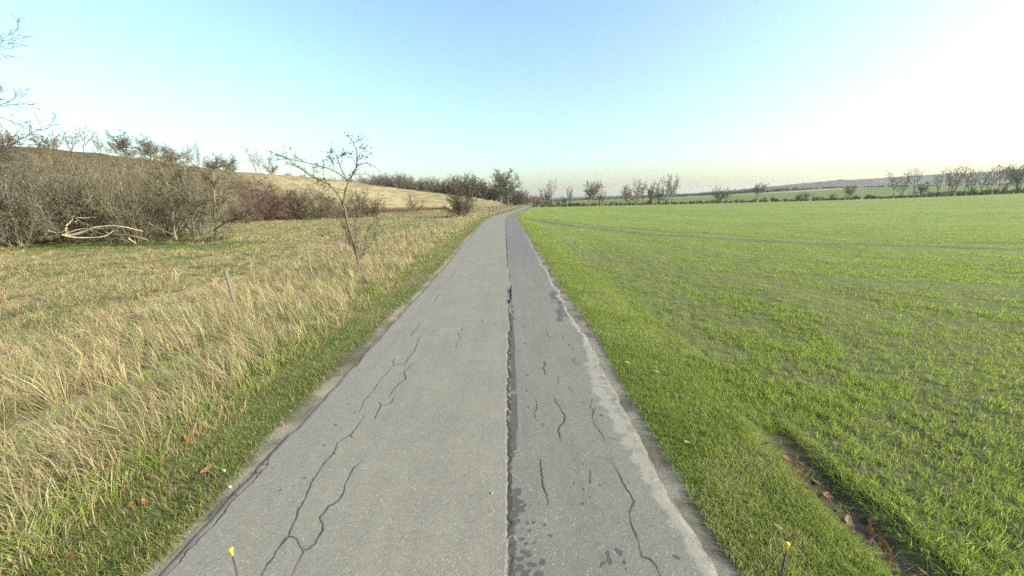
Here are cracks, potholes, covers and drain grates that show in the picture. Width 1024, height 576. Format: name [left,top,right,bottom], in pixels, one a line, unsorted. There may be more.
crack [534,362,570,438]
crack [614,465,661,576]
crack [263,307,420,572]
